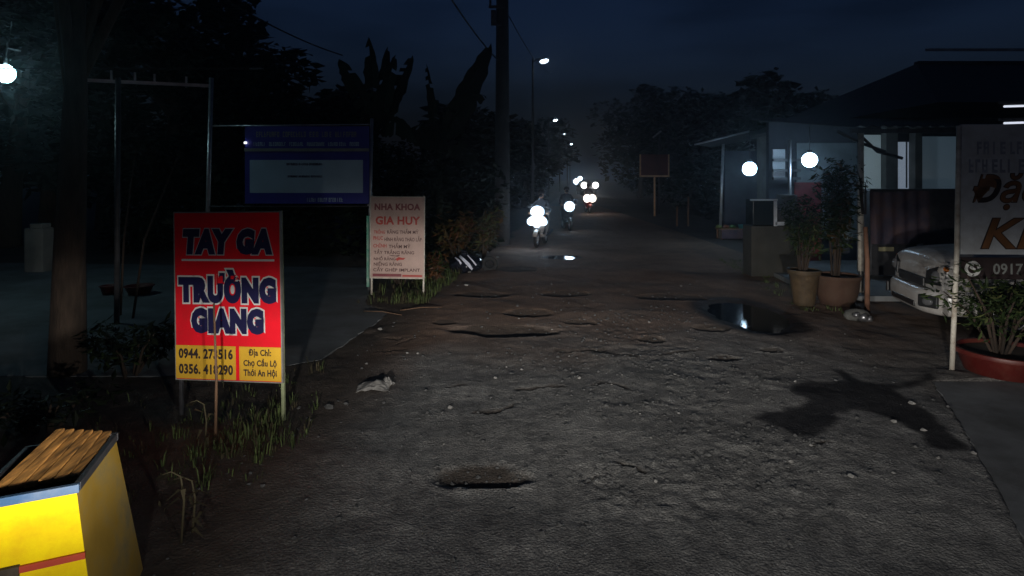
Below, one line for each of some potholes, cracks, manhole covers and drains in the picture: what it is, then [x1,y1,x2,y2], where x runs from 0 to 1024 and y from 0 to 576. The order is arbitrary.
pothole [637,334,667,344]
crack [584,459,653,484]
pothole [431,318,459,326]
pothole [424,461,539,490]
pothole [693,297,813,336]
crack [441,383,569,415]
crack [552,347,639,357]
pothole [633,293,709,301]
pothole [443,323,565,338]
pothole [500,307,555,318]
